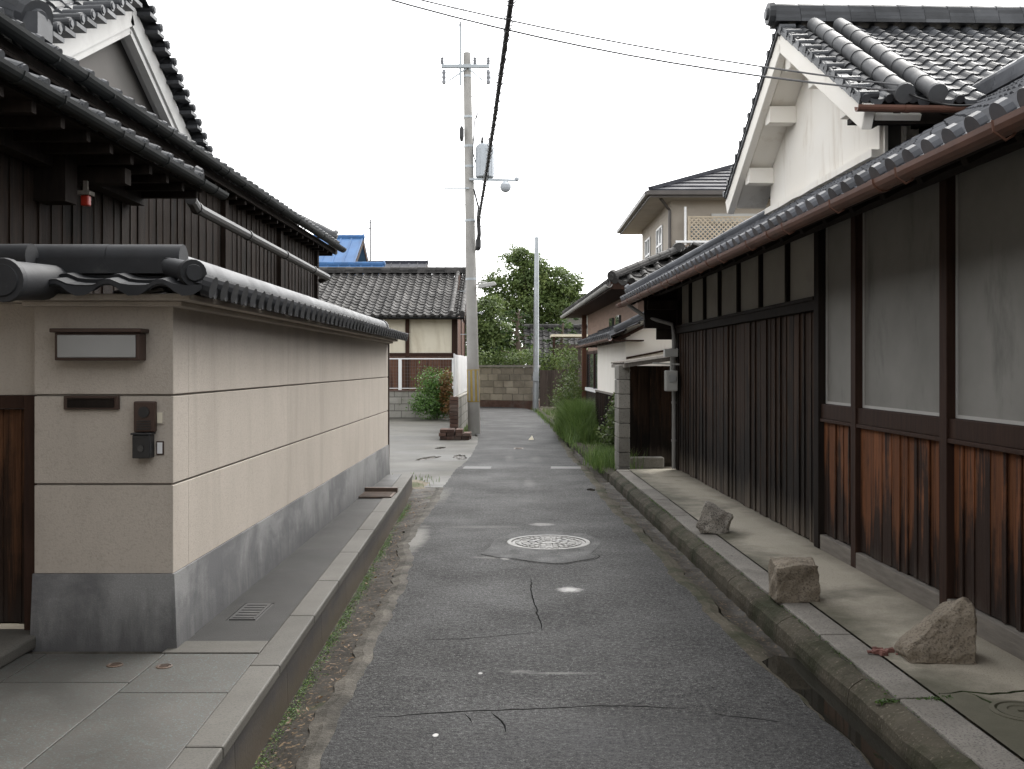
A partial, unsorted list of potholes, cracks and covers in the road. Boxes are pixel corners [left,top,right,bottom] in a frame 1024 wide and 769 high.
crack [432,554,600,640]
drain grate [226,603,273,621]
manhole cover [989,700,1024,722]
manhole cover [506,535,591,550]
crack [370,705,788,732]
